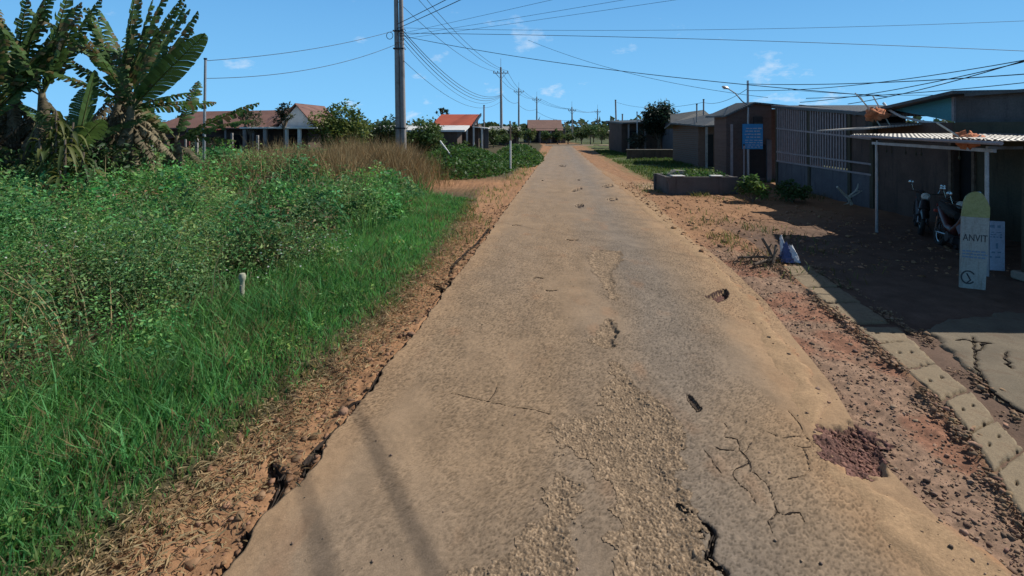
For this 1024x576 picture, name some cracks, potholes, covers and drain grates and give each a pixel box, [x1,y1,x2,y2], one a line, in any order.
pothole [587,318,620,349]
crack [222,460,286,574]
crack [303,372,381,478]
crack [451,387,549,414]
crack [704,414,811,533]
pothole [813,424,894,482]
pothole [705,289,729,303]
